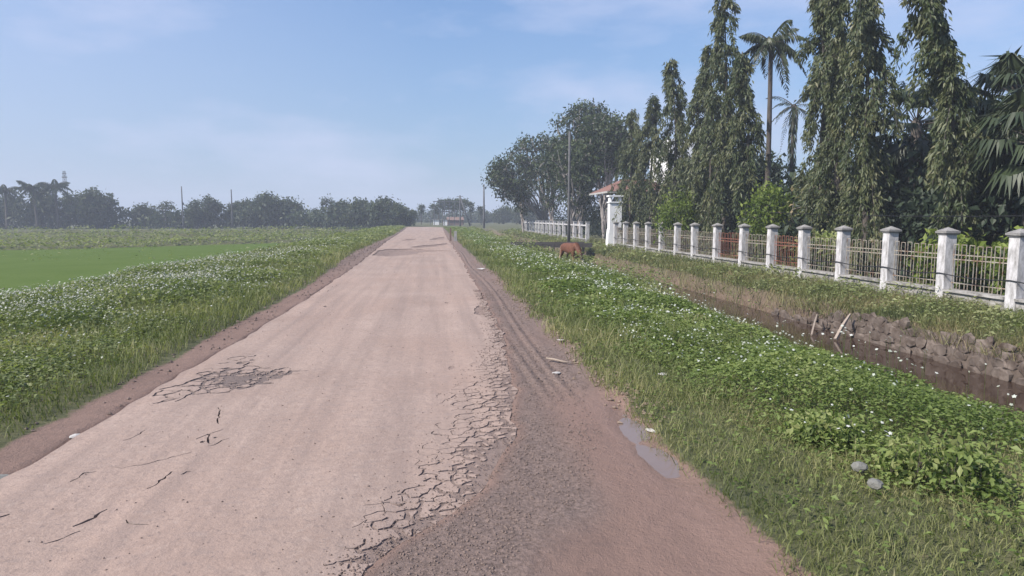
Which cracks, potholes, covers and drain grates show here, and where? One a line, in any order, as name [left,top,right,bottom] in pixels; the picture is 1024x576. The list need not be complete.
crack [323,302,518,576]
crack [44,509,107,544]
crack [70,353,308,489]
